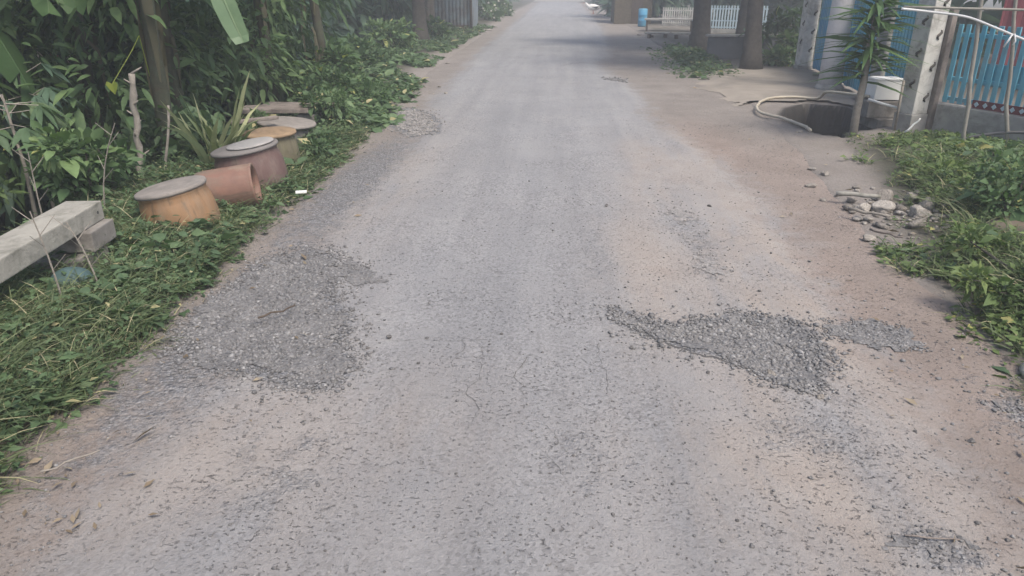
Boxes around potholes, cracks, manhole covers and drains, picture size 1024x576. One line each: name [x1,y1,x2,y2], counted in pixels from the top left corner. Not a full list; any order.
crack [411,336,559,422]
